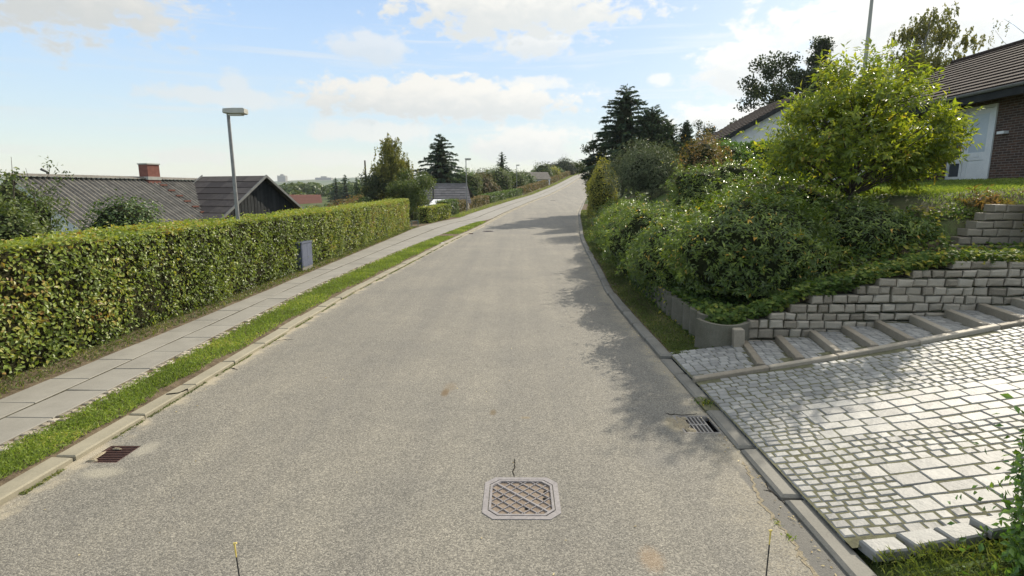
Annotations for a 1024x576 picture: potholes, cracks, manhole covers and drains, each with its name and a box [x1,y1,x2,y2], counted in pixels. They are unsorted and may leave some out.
drain grate [673,416,722,433]
drain grate [85,446,140,463]
crack [742,461,818,576]
manhole cover [482,477,561,520]
